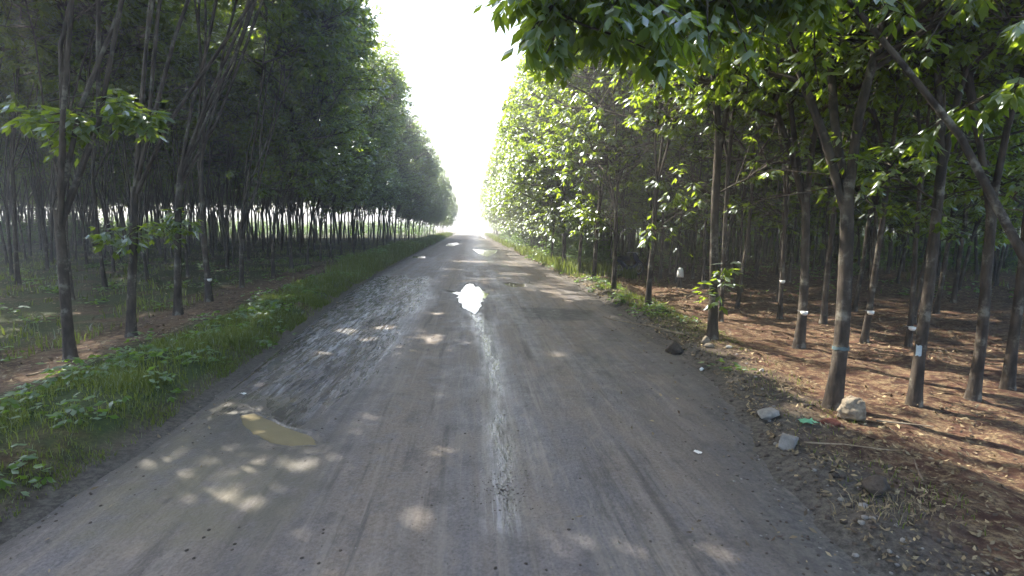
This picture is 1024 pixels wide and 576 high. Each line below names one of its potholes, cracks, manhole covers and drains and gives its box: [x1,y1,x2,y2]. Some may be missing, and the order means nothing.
pothole [444,282,493,315]
pothole [472,249,499,257]
pothole [236,409,326,448]
